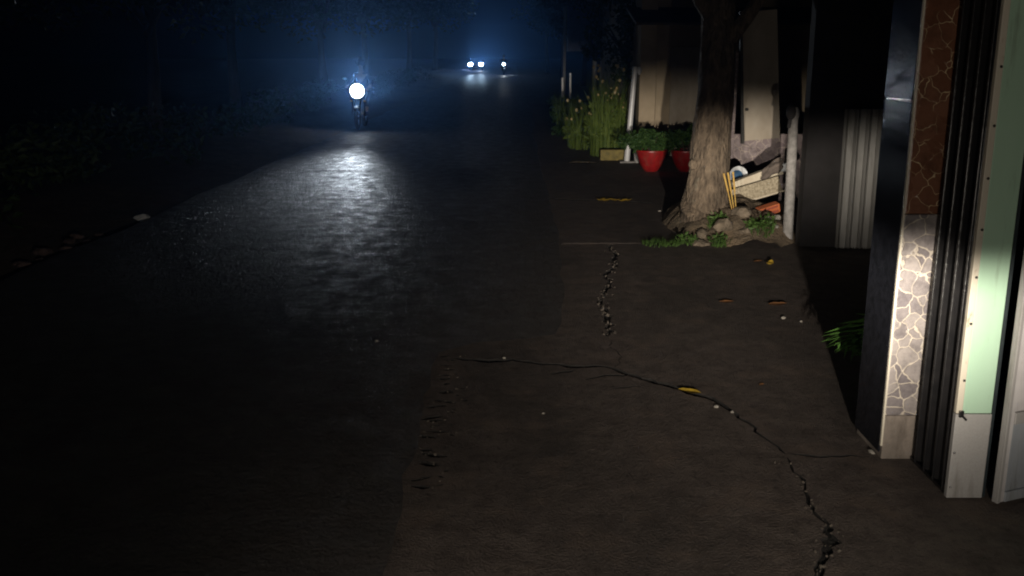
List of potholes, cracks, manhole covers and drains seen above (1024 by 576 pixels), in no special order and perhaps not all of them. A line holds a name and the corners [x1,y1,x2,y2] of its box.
crack [451,244,873,576]
